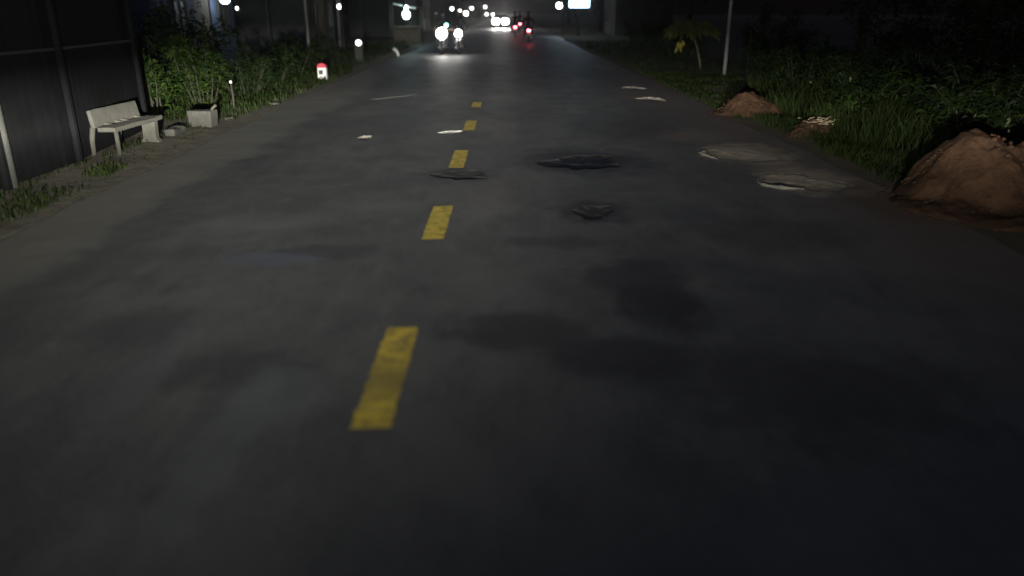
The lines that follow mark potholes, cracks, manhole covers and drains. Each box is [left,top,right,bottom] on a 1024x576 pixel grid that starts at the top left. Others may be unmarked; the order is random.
pothole [572,205,614,220]
pothole [752,172,855,192]
pothole [430,170,489,180]
pothole [535,155,621,170]
pothole [698,147,790,163]
